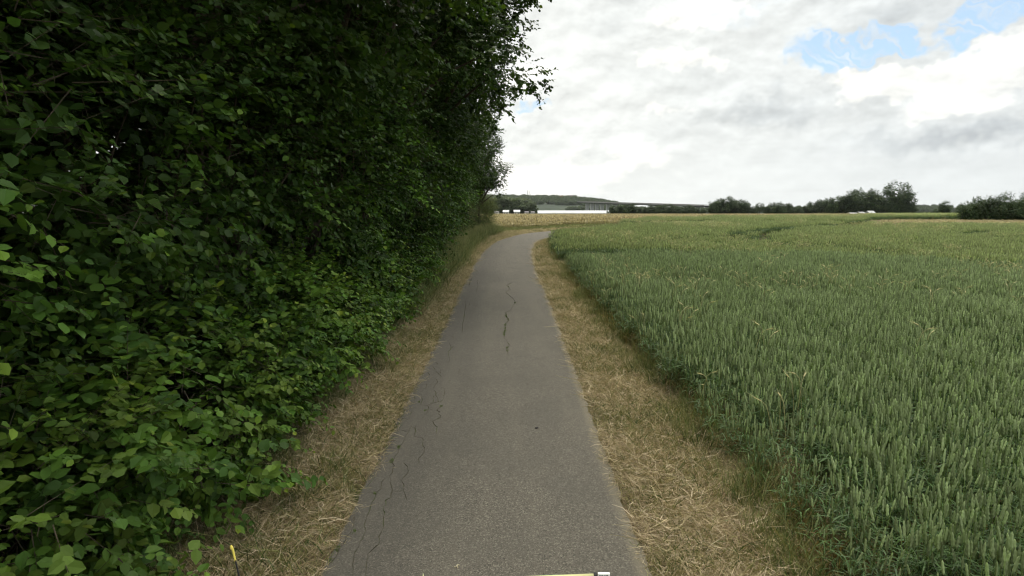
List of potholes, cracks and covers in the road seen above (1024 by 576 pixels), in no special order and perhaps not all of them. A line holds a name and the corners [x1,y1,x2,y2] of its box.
crack [327,280,478,575]
crack [503,283,516,356]
